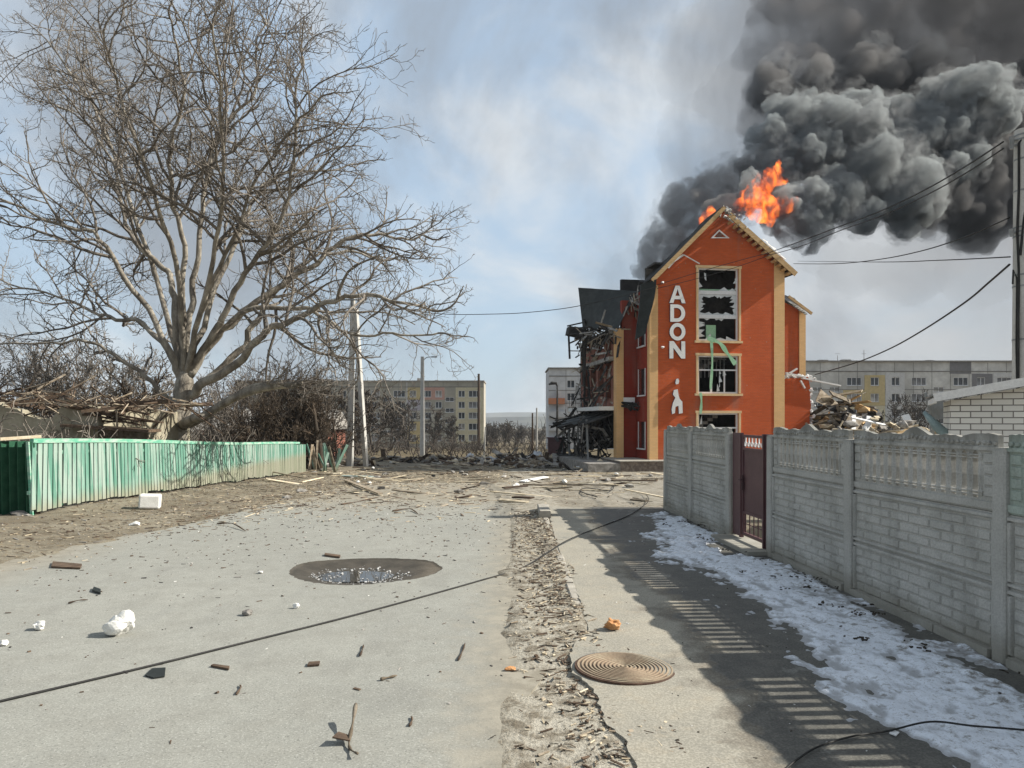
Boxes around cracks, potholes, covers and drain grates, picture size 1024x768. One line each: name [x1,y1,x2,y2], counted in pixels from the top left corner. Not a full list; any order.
pothole [289,558,443,585]
manhole cover [575,652,675,686]
